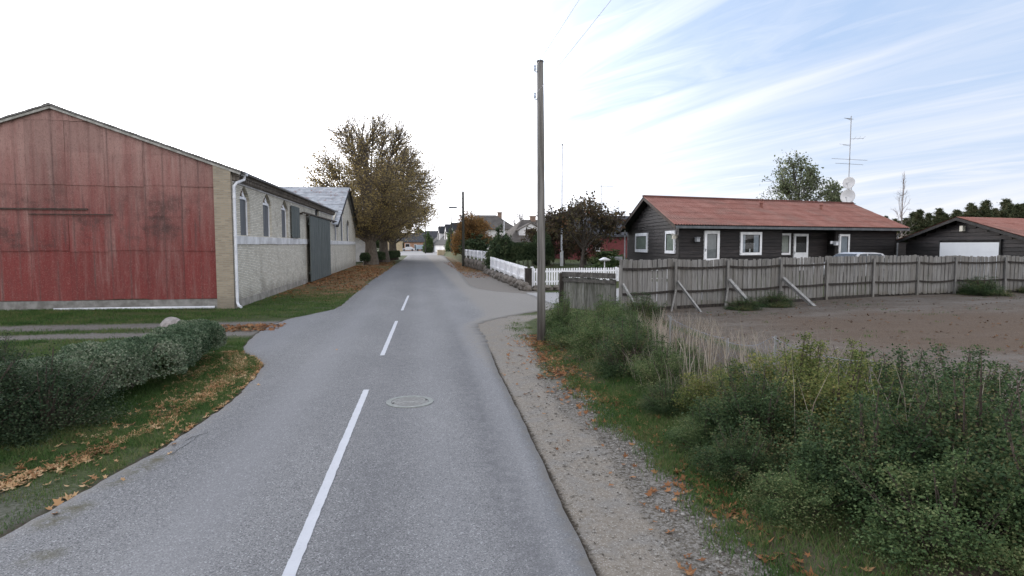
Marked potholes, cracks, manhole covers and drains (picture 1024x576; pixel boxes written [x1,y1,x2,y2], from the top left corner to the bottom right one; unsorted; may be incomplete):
manhole cover [386,395,434,408]
